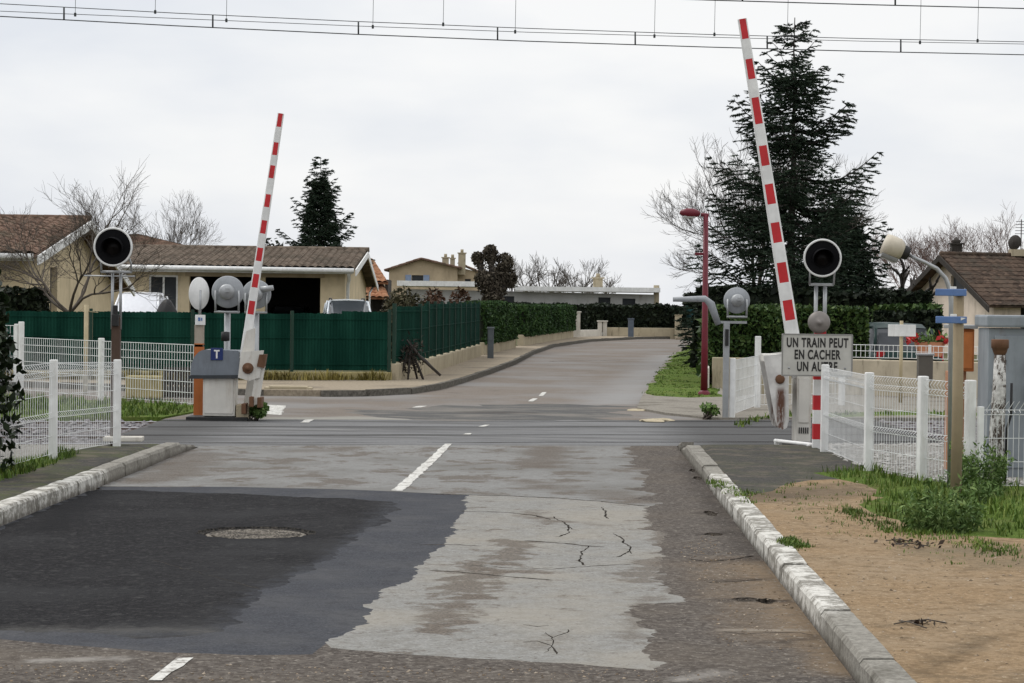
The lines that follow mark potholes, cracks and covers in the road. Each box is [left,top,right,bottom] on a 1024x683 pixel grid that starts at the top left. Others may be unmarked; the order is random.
crack [431,508,632,580]
manhole cover [195,526,316,539]
crack [523,624,569,654]
